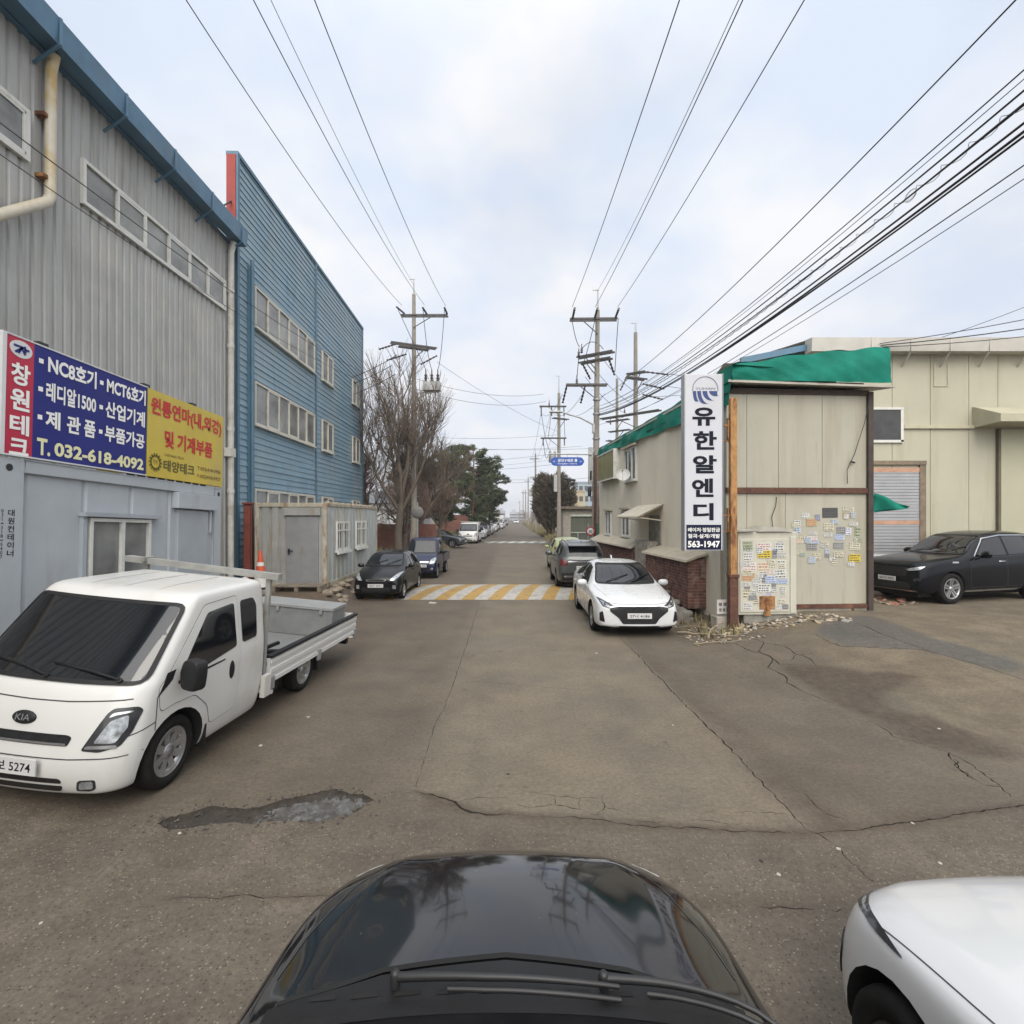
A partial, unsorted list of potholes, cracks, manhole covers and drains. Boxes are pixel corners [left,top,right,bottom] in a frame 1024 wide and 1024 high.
crack [158,894,331,902]
crack [408,792,505,816]
crack [520,637,1024,882]
pothole [133,784,394,835]
